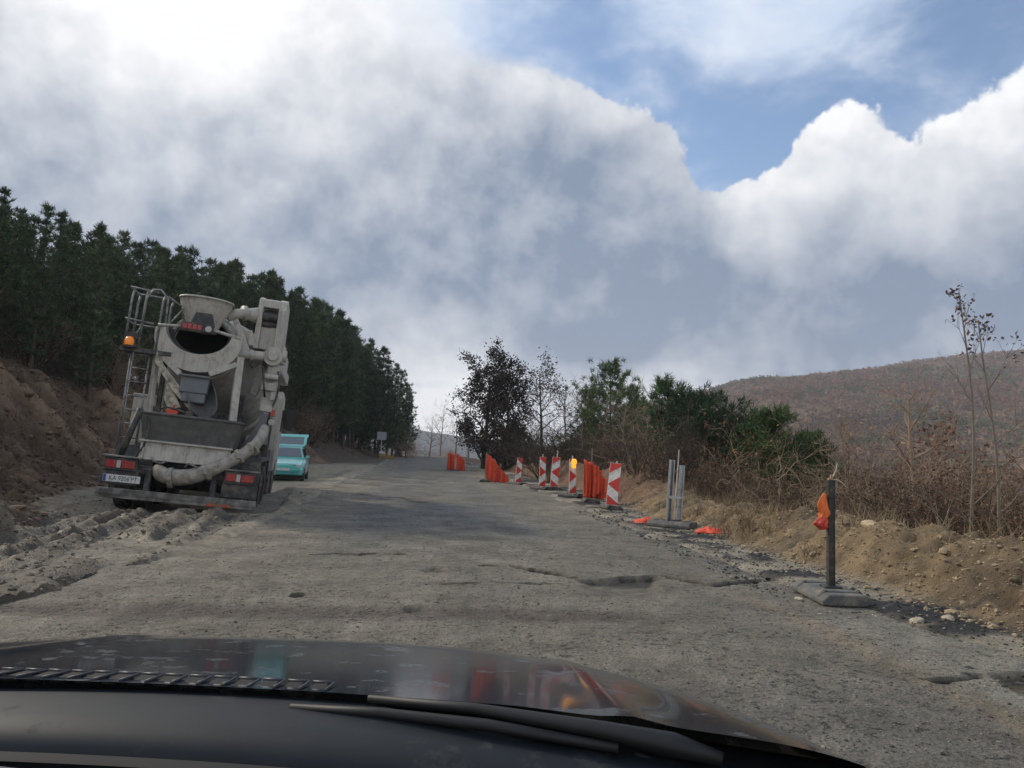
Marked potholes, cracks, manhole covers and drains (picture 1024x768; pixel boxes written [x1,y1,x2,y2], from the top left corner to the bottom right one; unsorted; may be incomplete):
pothole [573,574,666,599]
crack [438,564,581,586]
pothole [983,670,1024,696]
